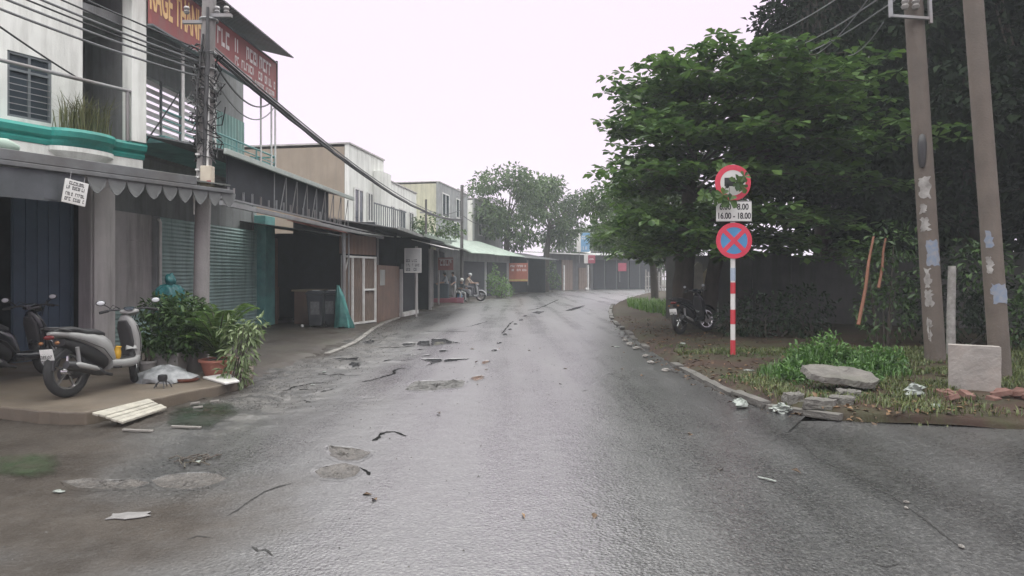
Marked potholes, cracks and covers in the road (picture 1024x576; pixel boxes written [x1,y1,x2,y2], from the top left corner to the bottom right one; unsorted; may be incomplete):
pothole [309,461,365,481]
crack [372,431,406,441]
pothole [429,338,459,346]
crack [287,321,513,402]
pothole [420,358,443,367]
pothole [325,444,374,463]
